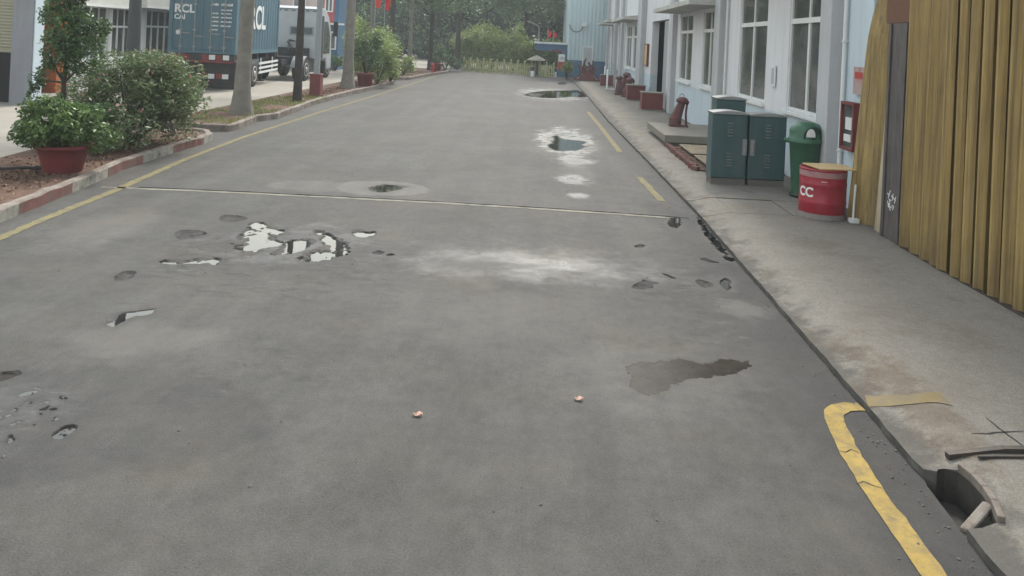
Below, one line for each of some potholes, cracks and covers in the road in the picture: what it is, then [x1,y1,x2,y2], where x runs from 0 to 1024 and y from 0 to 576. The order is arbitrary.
pothole [159,256,223,265]
pothole [368,184,408,193]
pothole [548,135,587,151]
crack [696,217,734,263]
pothole [51,424,78,439]
pothole [293,229,351,262]
pothole [269,238,317,256]
pothole [631,280,659,290]
pothole [351,229,377,237]
pothole [106,308,156,327]
pothole [523,90,587,98]
